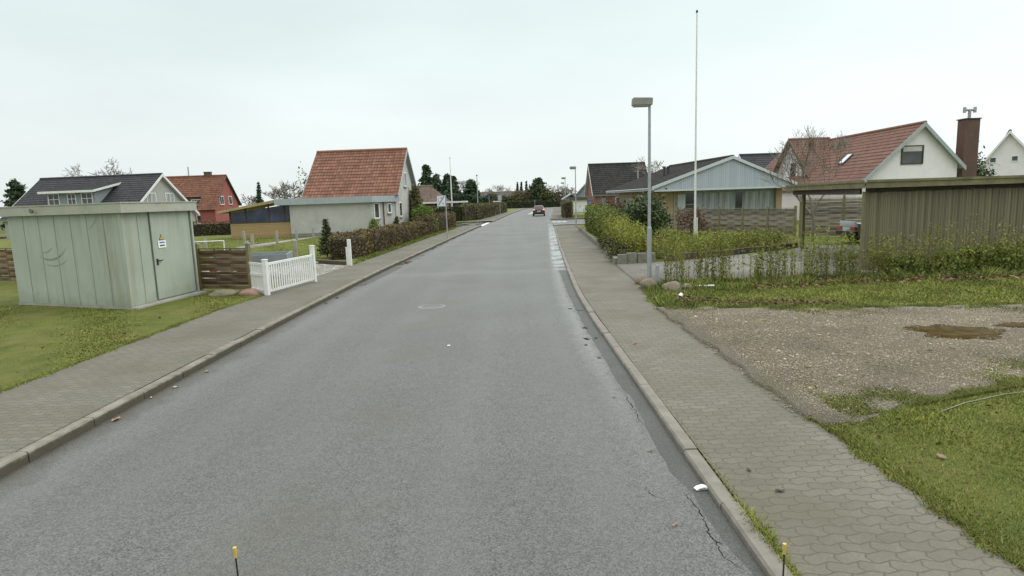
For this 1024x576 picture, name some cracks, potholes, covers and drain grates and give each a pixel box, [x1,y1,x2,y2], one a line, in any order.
crack [683,492,744,570]
